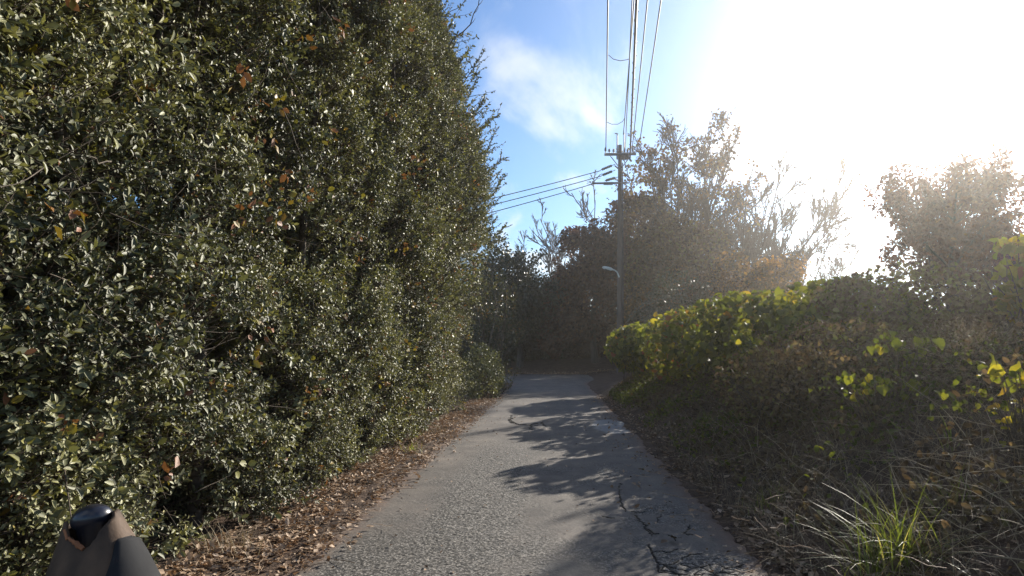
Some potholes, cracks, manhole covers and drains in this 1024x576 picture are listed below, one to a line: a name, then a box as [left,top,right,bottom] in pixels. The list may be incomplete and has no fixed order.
crack [602,483,743,576]
crack [508,415,545,430]
